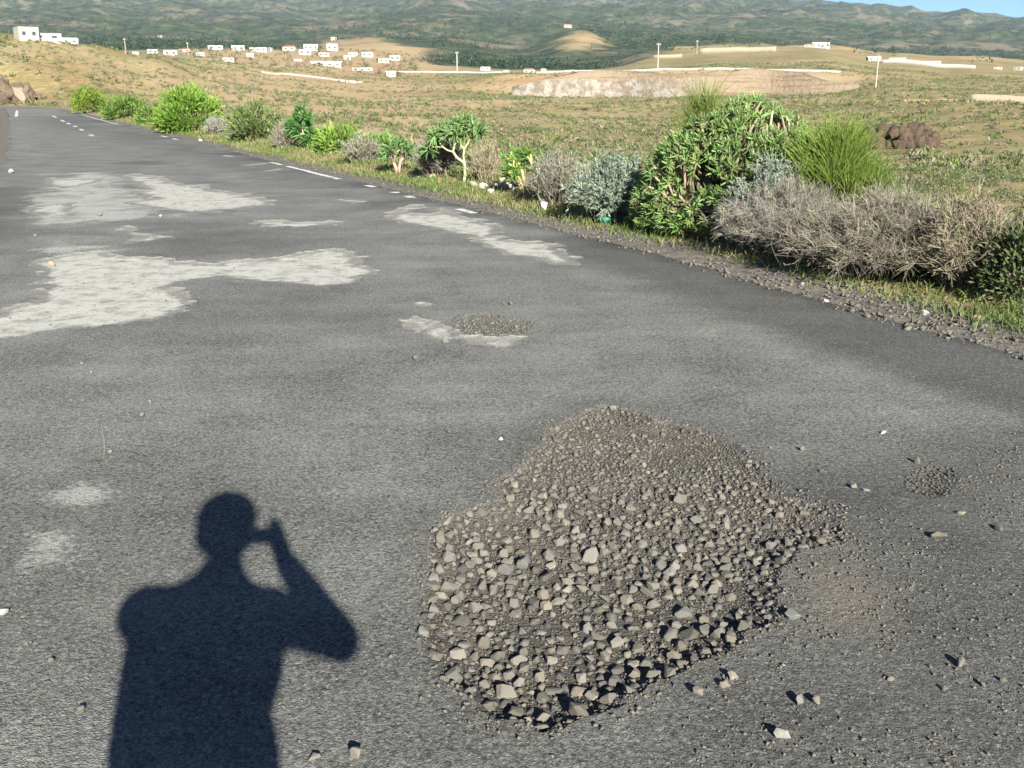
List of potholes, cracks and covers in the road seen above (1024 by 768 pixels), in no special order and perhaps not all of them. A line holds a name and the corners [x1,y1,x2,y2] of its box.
pothole [451,313,534,336]
pothole [412,405,845,733]
pothole [900,466,959,497]
